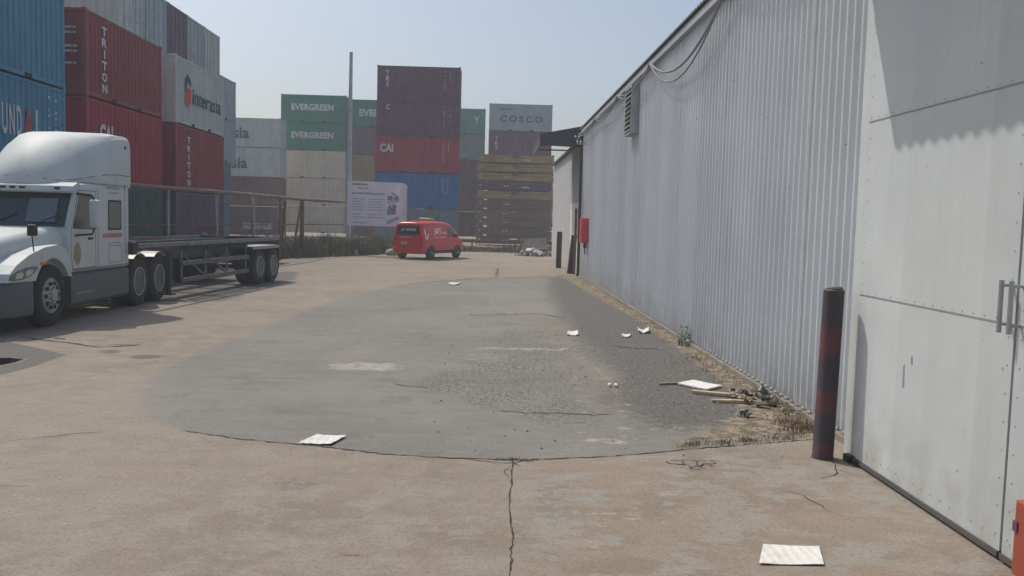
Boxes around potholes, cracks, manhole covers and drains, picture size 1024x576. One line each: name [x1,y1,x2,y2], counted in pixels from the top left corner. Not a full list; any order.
crack [666,459,715,469]
